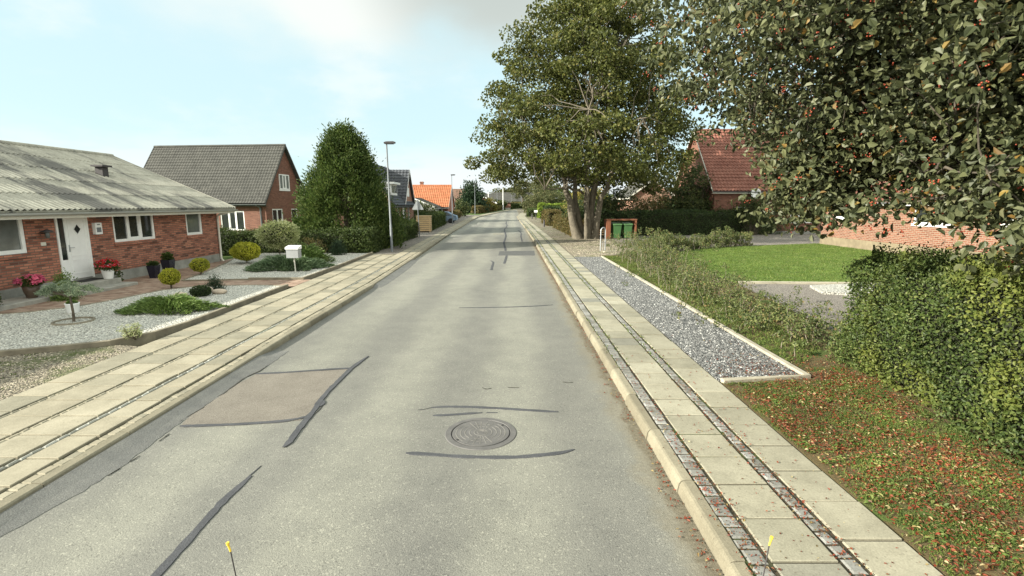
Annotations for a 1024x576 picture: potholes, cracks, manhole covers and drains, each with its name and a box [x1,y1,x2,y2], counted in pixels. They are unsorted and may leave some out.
manhole cover [445,417,517,450]
